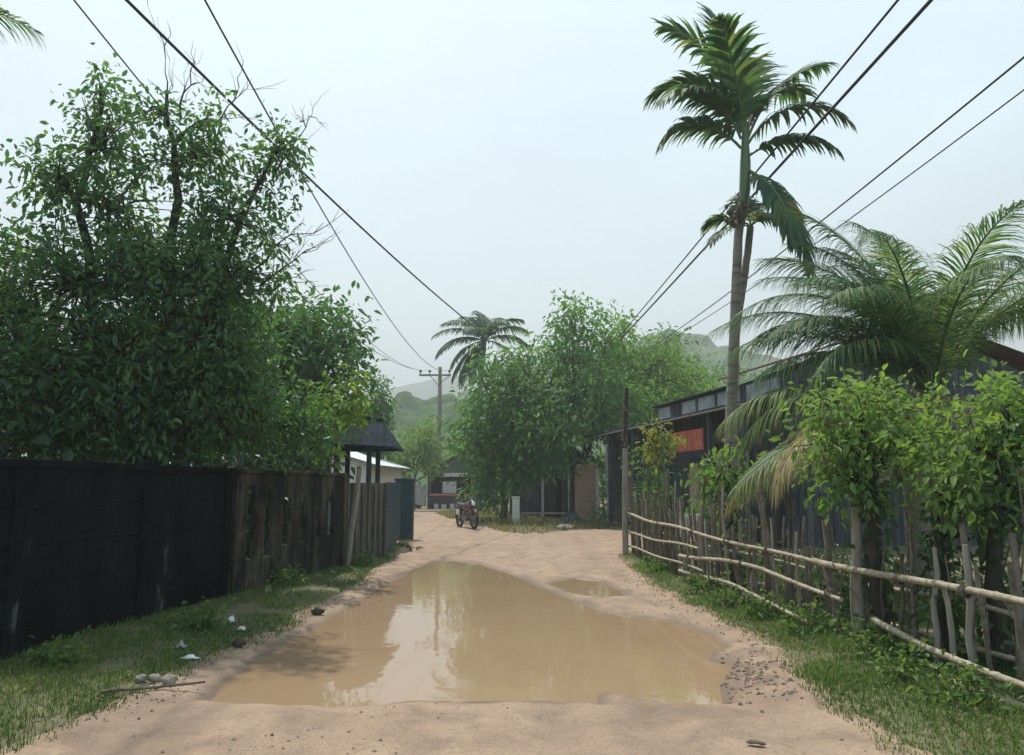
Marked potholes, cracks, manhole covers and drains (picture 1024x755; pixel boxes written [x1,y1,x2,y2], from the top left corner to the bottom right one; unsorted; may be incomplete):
pothole [202,559,739,708]
